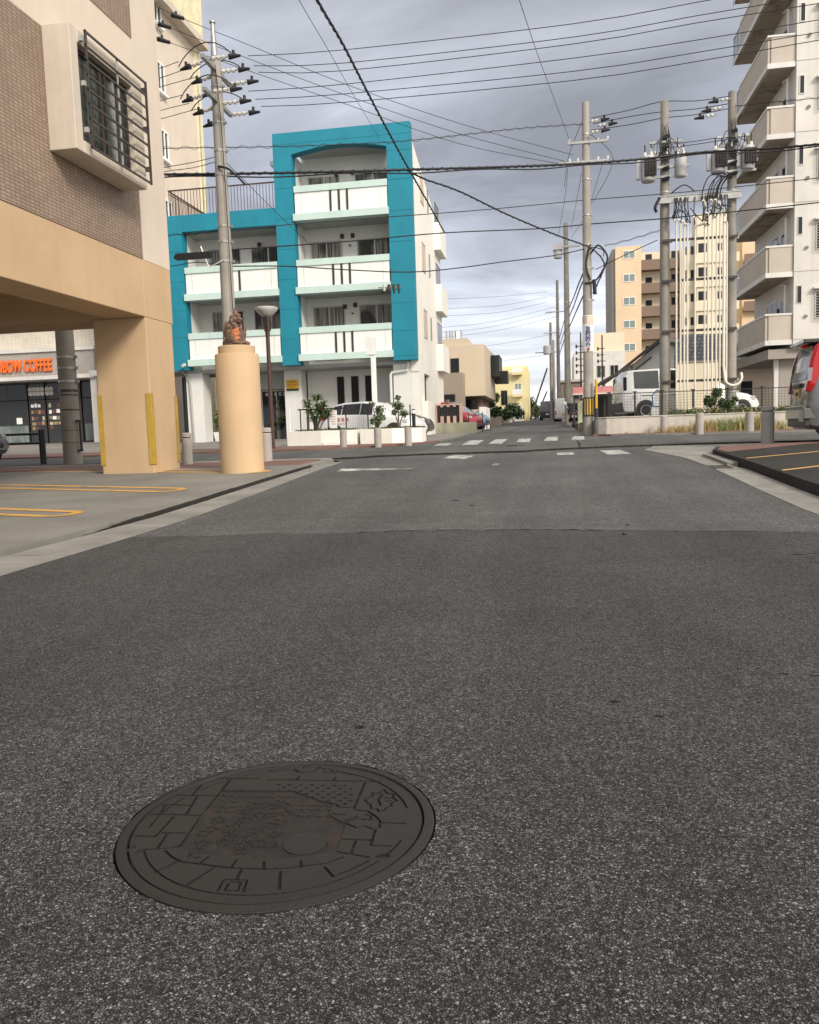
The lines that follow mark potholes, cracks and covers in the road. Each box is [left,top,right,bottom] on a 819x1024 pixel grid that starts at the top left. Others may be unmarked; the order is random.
manhole cover [115,761,435,915]
